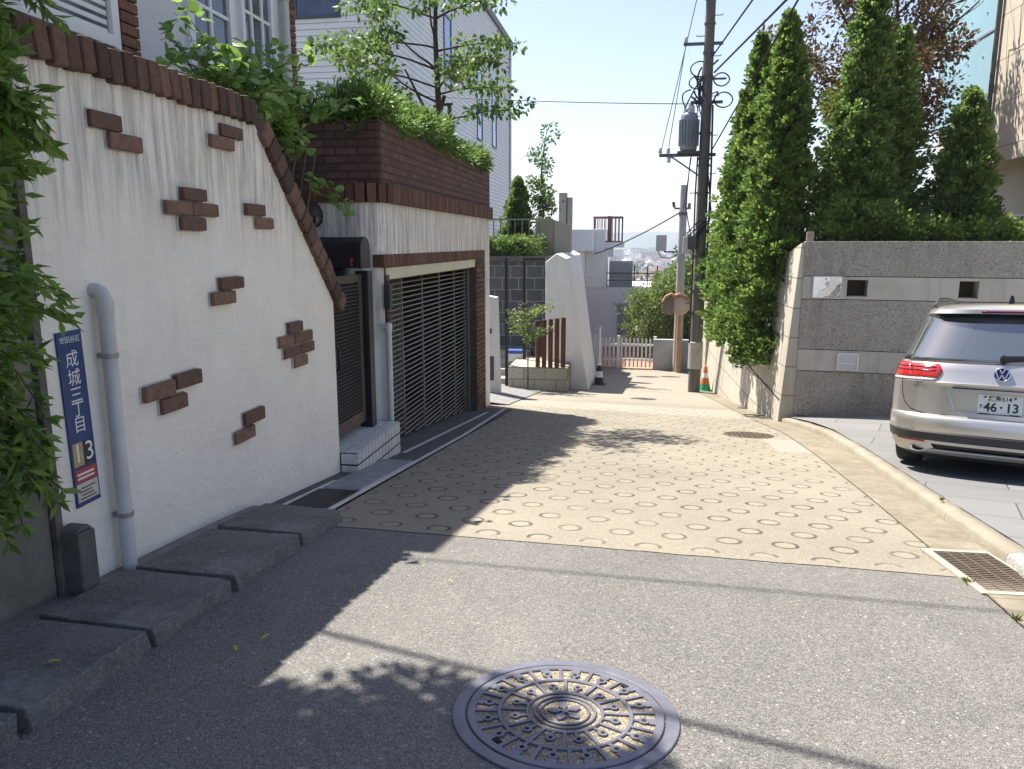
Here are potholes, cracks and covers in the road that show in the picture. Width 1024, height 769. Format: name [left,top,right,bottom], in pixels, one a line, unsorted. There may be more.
manhole cover [452,660,680,769]
drain grate [920,548,1024,600]
